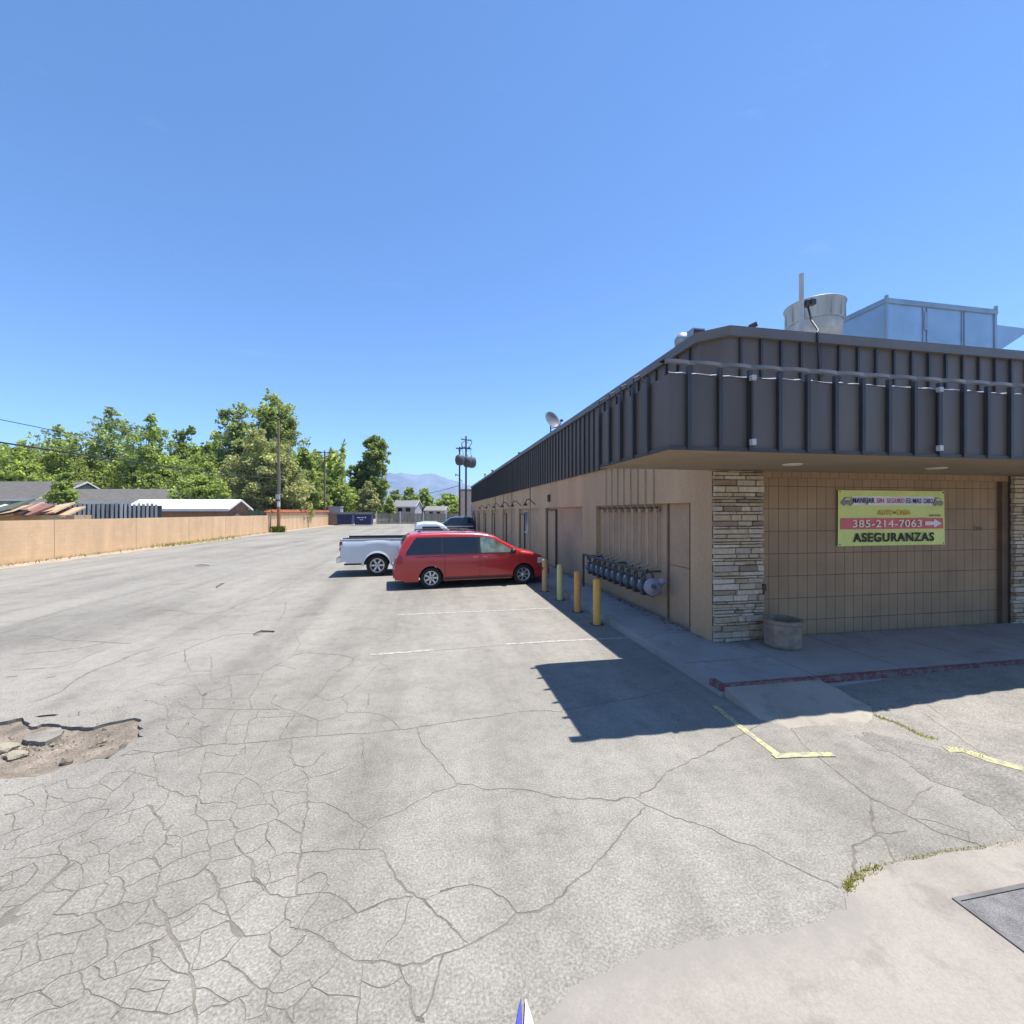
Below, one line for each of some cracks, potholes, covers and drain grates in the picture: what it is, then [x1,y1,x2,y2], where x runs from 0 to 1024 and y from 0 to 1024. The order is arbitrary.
manhole cover [952,883,1024,952]
crack [0,624,985,1024]
pothole [0,718,144,779]
crack [6,606,253,701]
